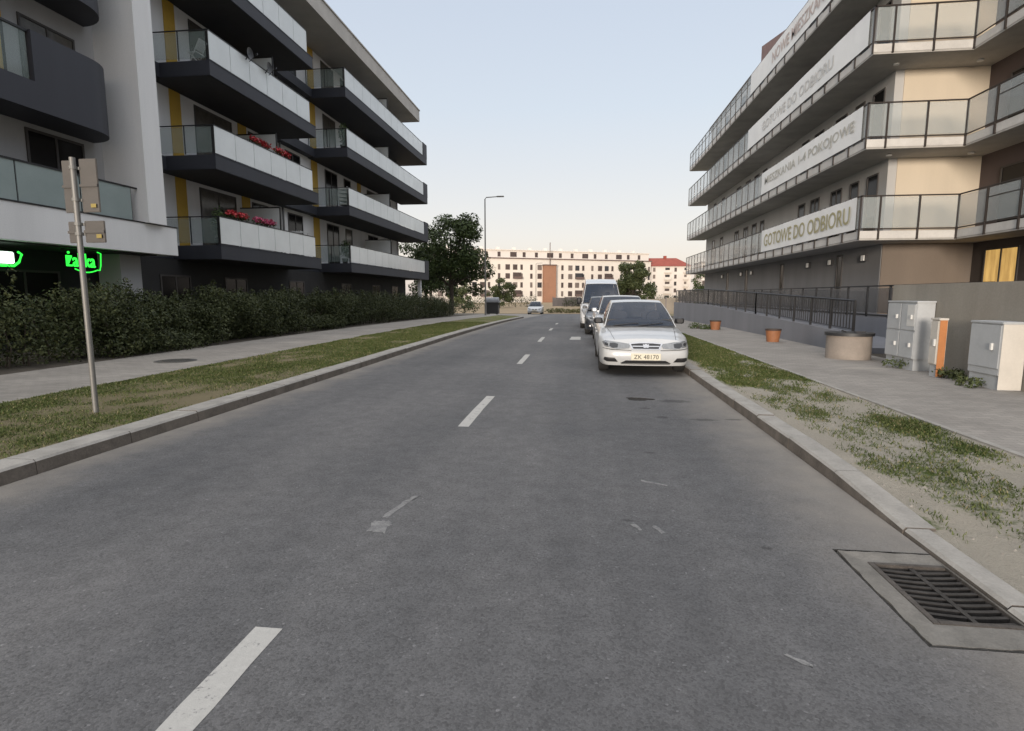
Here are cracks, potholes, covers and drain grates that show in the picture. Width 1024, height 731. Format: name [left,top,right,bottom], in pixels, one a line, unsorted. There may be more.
drain grate [837,550,1024,652]
